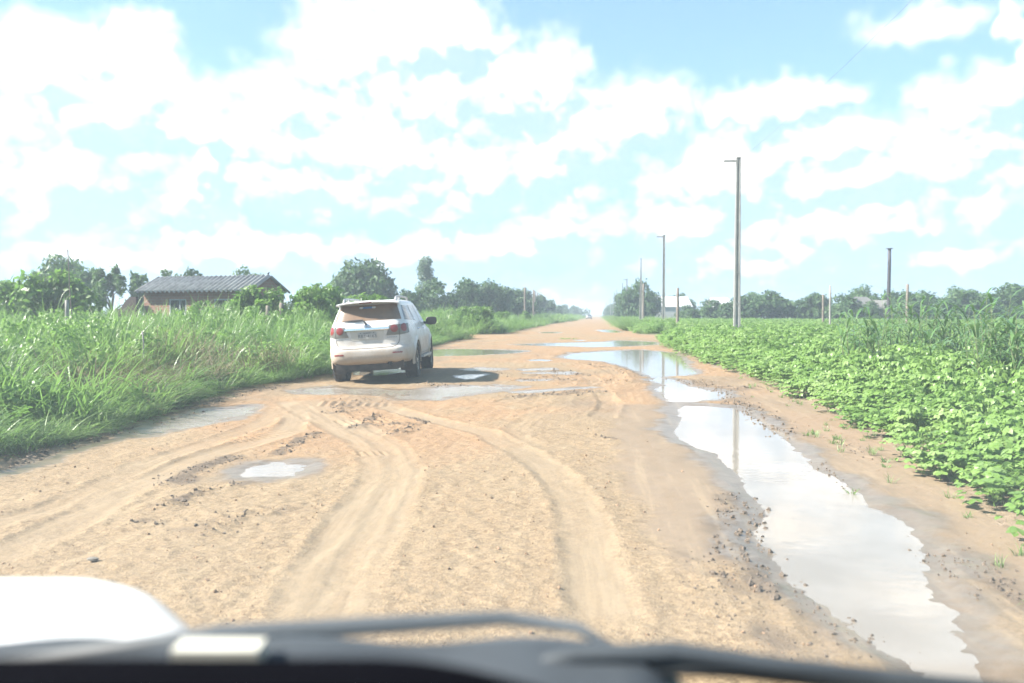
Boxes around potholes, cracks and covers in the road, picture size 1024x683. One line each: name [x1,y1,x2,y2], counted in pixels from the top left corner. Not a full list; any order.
pothole [433,348,540,357]
pothole [553,349,710,377]
pothole [660,401,1024,683]
pothole [224,456,327,479]
pothole [282,384,533,402]
pothole [644,377,736,402]
